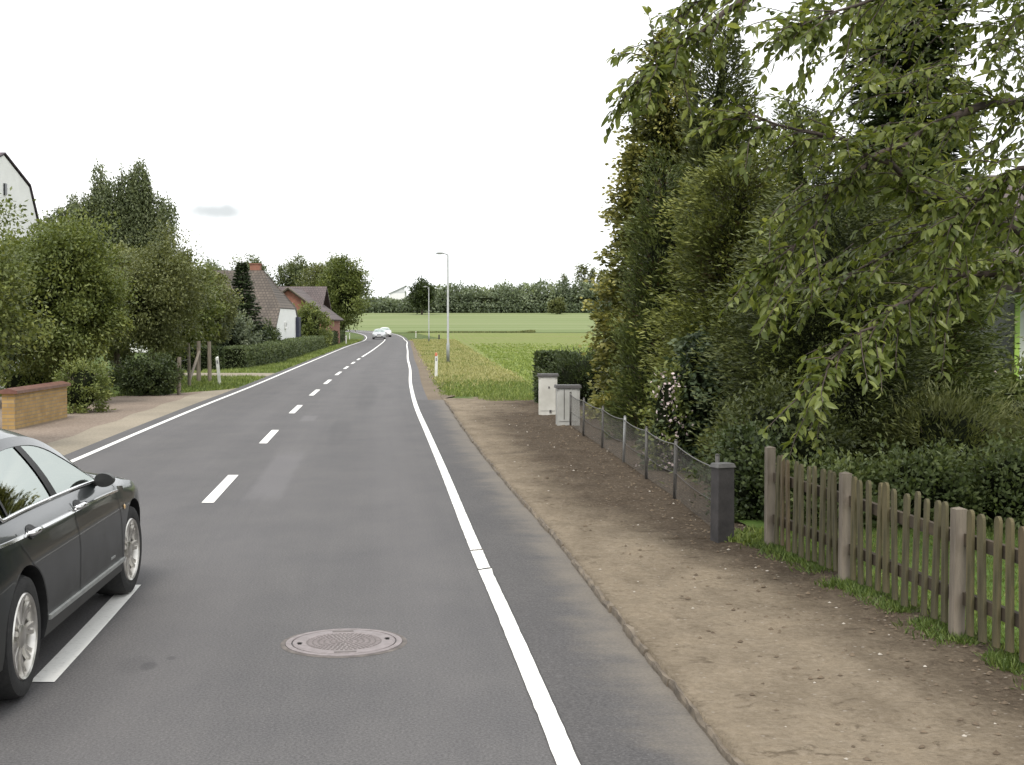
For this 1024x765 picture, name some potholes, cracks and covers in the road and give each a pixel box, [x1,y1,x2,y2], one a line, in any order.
manhole cover [280,628,407,658]
